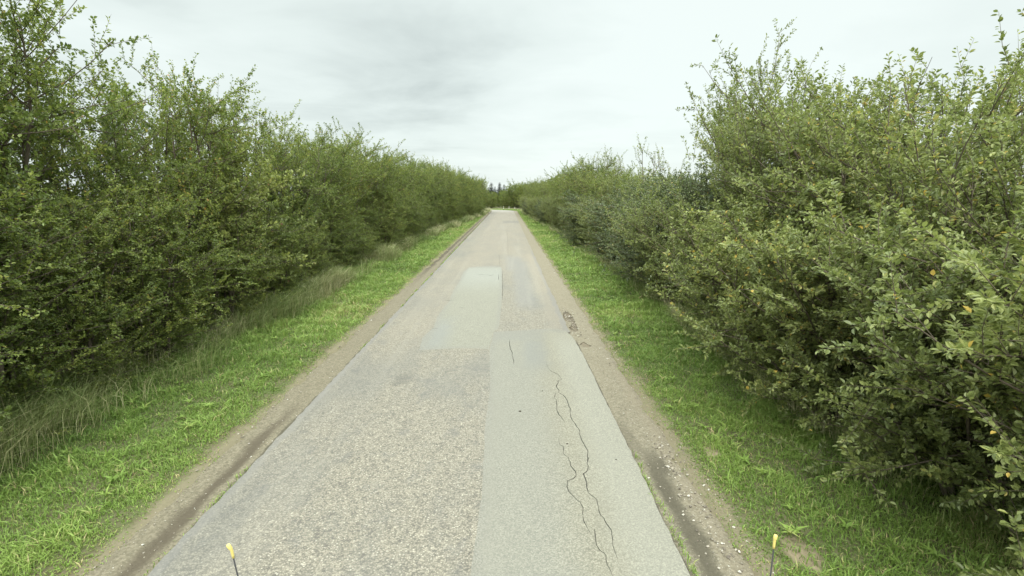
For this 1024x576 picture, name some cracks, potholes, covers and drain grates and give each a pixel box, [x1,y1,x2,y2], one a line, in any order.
pothole [563,311,578,332]
crack [546,362,618,574]
